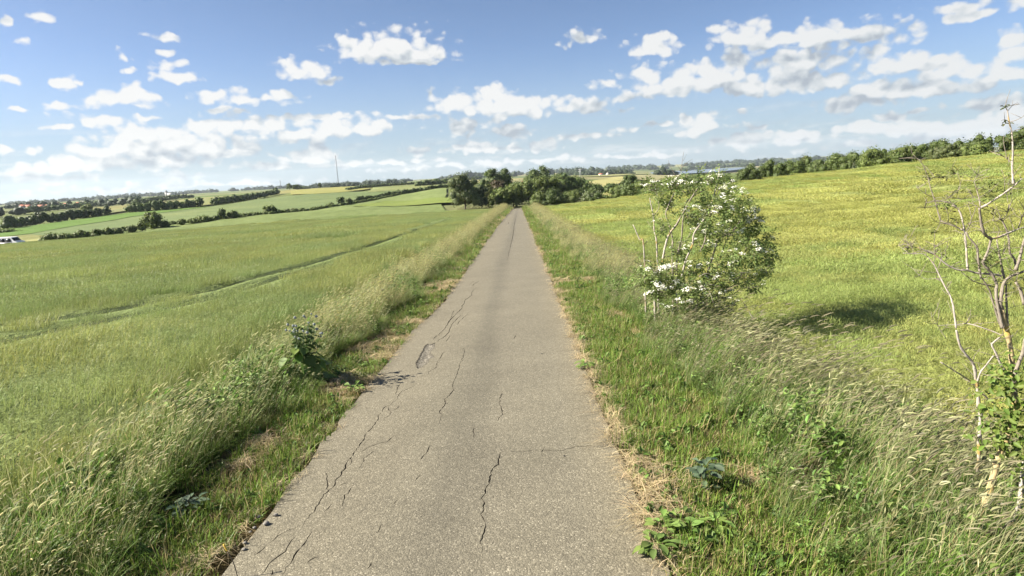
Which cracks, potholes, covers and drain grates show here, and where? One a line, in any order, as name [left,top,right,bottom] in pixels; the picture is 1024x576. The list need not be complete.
crack [428,281,477,420]
crack [255,383,409,576]
pothole [416,343,435,369]
crack [480,445,590,558]
